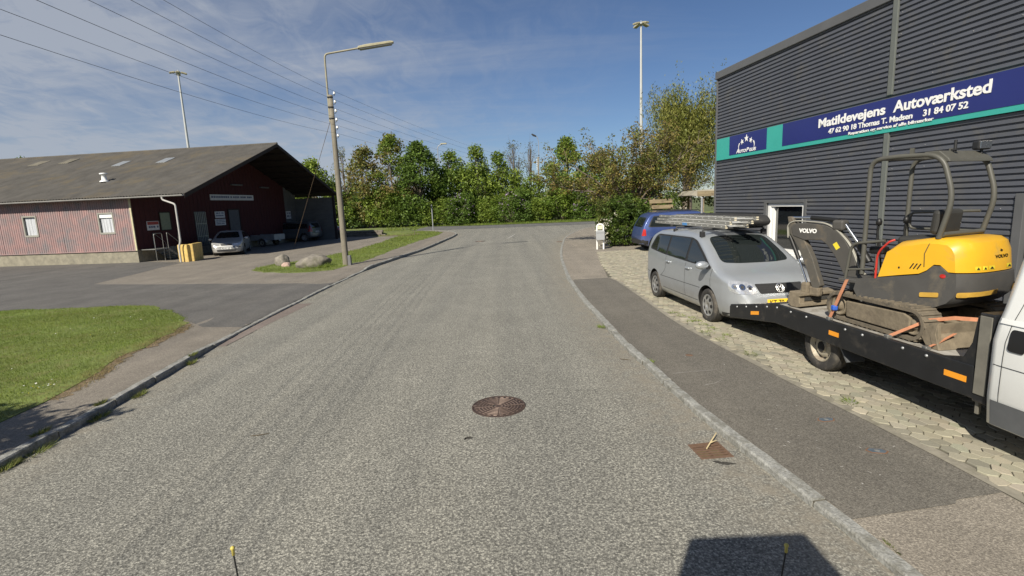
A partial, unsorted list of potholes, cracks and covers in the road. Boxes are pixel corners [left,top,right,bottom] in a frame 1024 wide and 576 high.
manhole cover [472,396,526,417]
drain grate [688,441,734,460]
